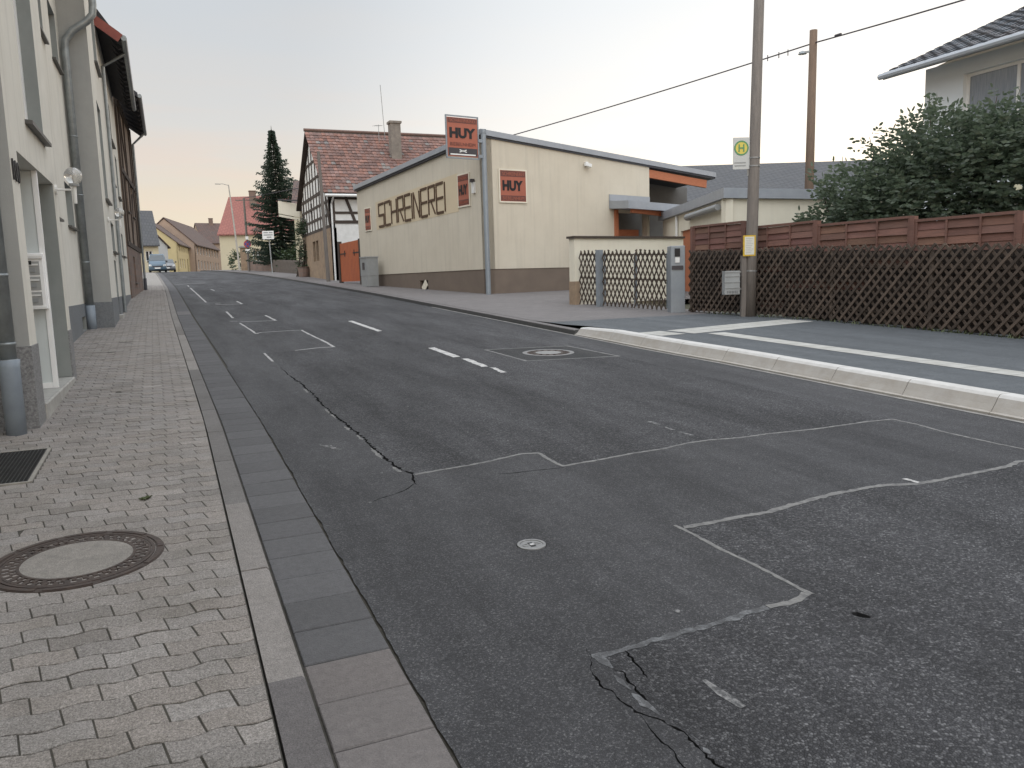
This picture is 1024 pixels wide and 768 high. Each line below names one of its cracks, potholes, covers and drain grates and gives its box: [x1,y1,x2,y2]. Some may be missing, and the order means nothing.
crack [586,649,725,768]
drain grate [0,447,52,487]
manhole cover [0,530,165,593]
utility cover [517,539,546,550]
crack [282,369,416,501]
